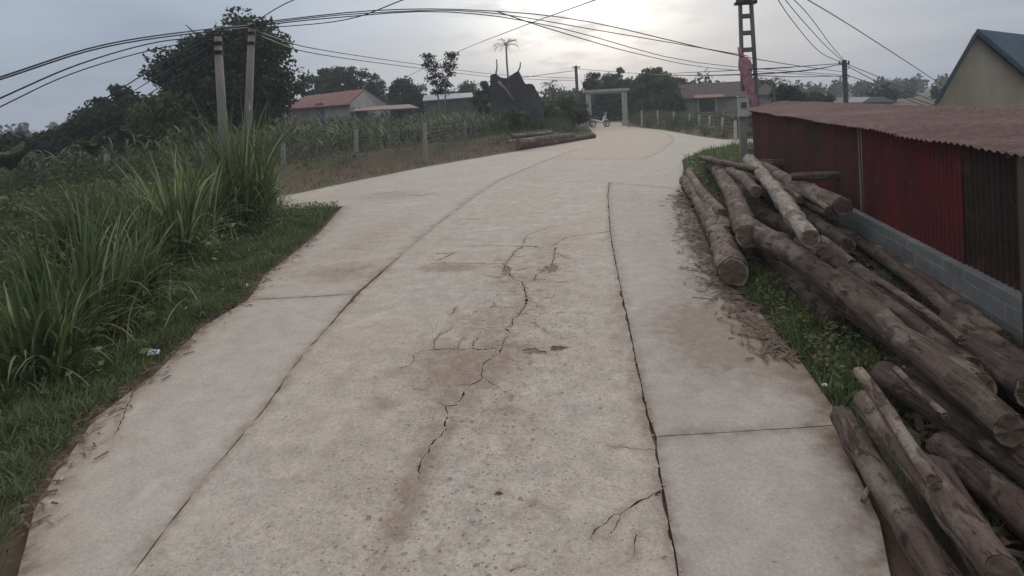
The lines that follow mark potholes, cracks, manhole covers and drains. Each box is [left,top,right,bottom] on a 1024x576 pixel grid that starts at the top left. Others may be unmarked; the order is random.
crack [405,245,570,474]
crack [590,491,660,556]
